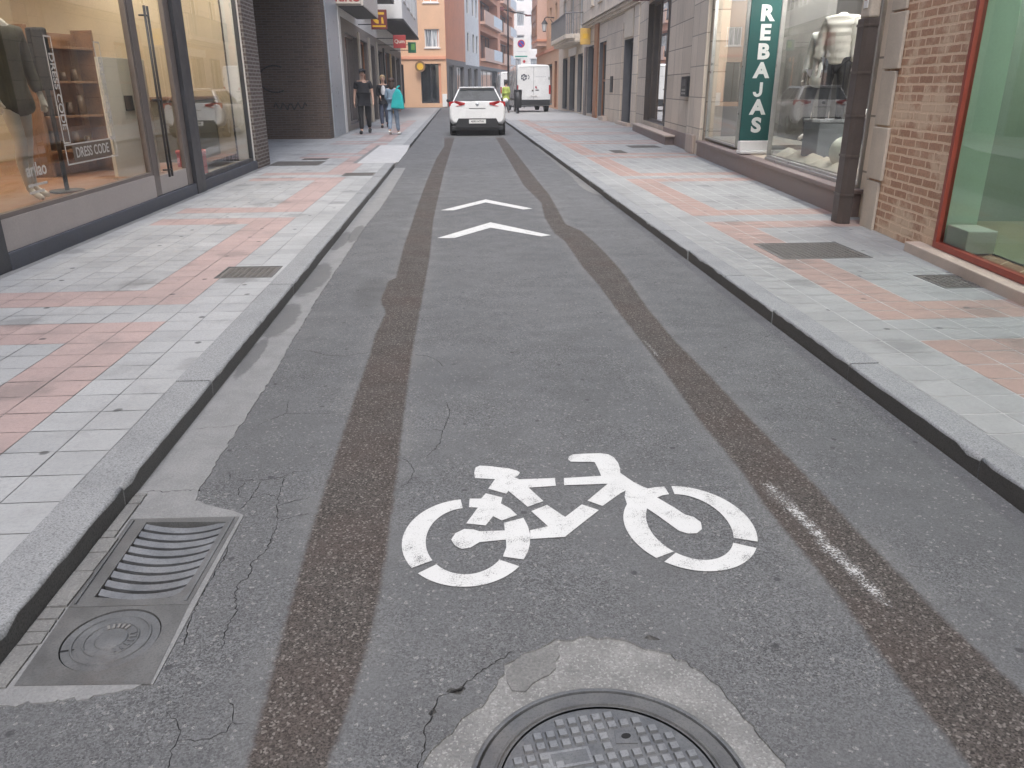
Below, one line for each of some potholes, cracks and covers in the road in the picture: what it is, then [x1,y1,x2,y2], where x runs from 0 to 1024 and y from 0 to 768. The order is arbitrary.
crack [398,402,450,489]
crack [182,471,313,650]
manhole cover [471,688,746,768]
crack [166,703,244,768]
crack [417,650,514,768]
drain grate [69,516,239,608]
